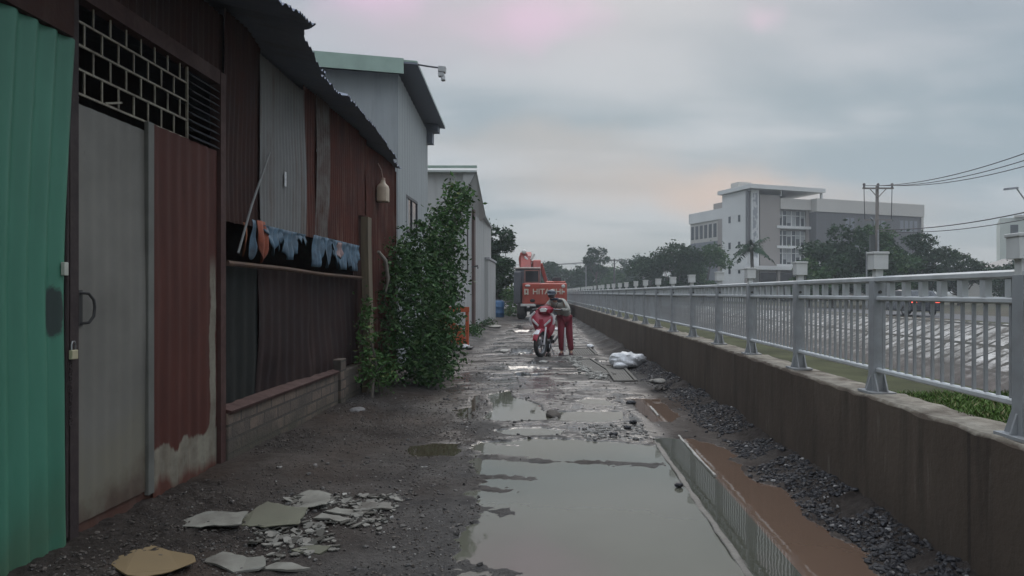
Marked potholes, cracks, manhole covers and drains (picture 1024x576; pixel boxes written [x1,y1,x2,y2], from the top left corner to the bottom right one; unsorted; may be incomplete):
pothole [439,435,667,576]
pothole [552,410,628,423]
pothole [394,440,473,458]
pothole [488,426,569,436]
pothole [479,389,556,421]
